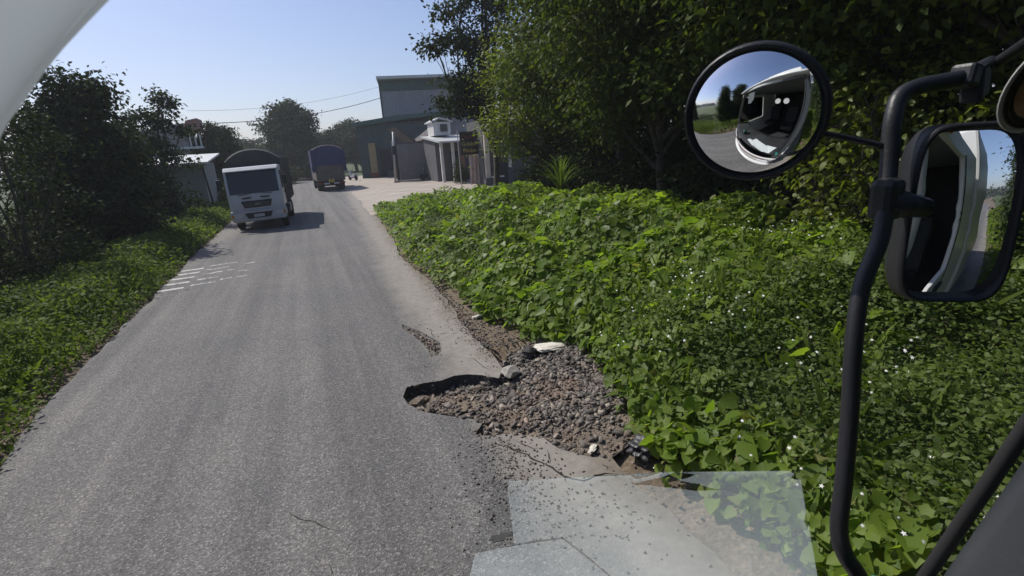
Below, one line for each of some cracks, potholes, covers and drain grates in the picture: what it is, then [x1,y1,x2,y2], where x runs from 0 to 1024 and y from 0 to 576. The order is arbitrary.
pothole [403,344,634,458]
pothole [402,325,441,356]
crack [493,441,612,482]
